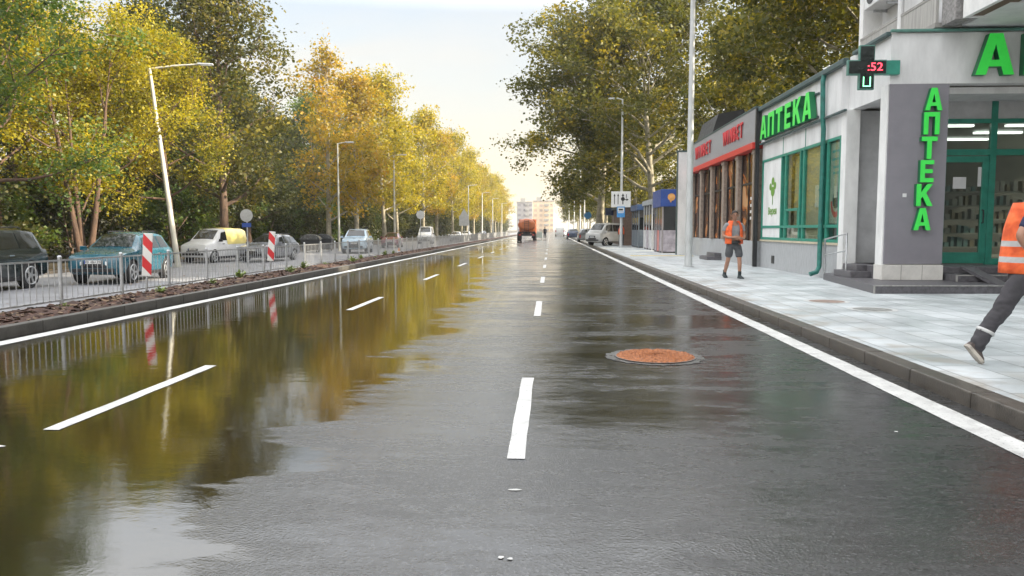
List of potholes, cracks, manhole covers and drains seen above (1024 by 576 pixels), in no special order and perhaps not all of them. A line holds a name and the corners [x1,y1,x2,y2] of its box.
manhole cover [605,348,706,366]
